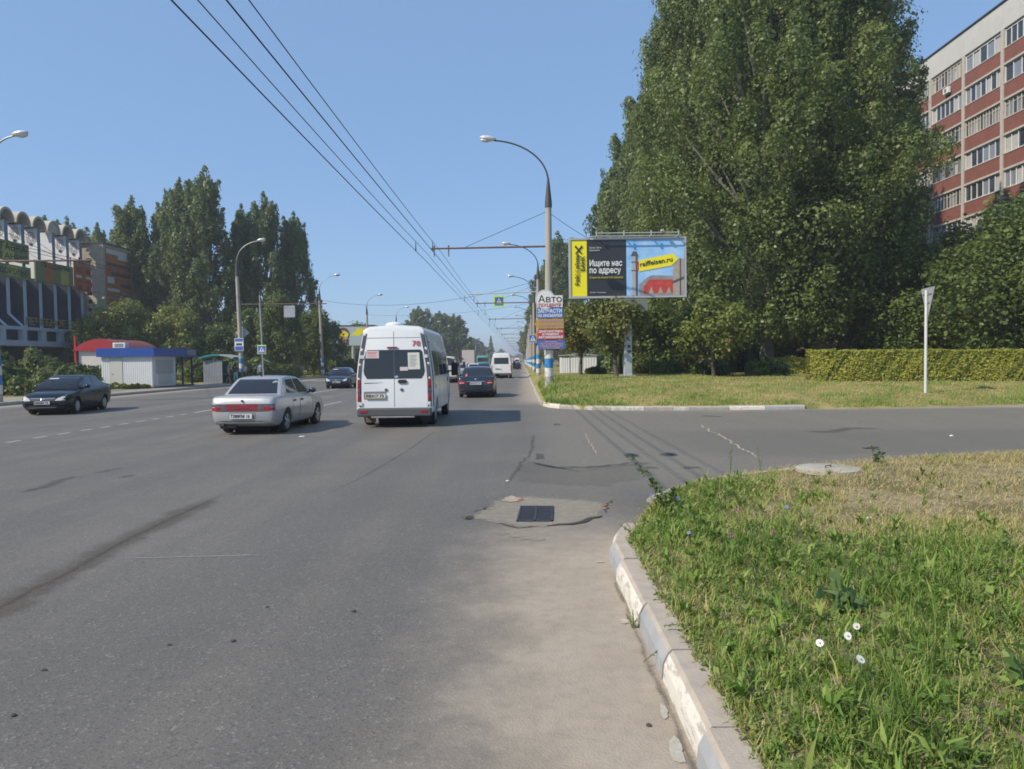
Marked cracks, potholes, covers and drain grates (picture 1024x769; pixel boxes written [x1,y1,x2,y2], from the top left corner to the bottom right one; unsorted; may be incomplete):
crack [701,416,757,458]
manhole cover [795,463,862,476]
drain grate [516,506,554,522]
